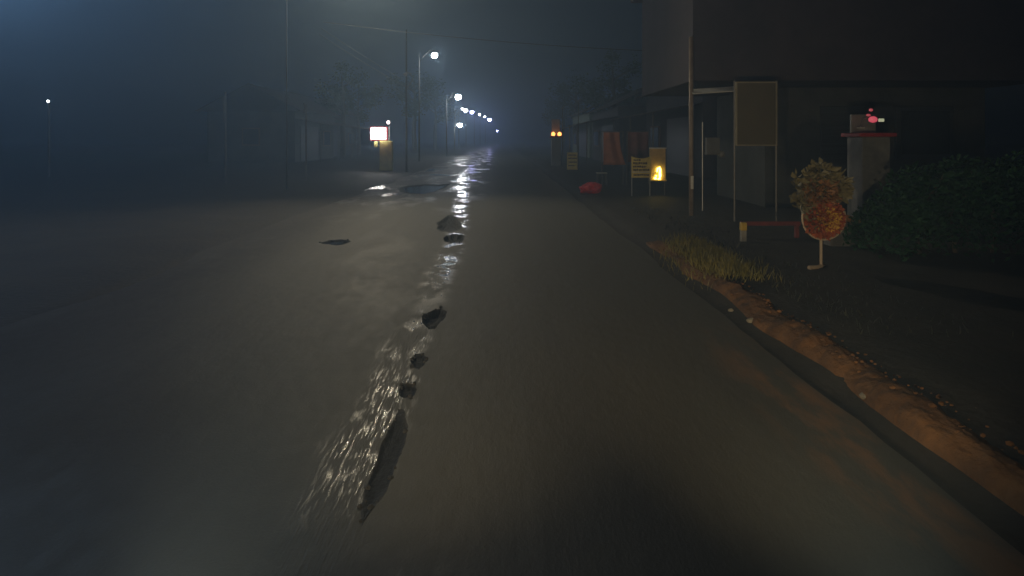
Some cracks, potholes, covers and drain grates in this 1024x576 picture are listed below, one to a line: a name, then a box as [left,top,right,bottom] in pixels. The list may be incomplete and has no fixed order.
pothole [410,353,428,370]
pothole [397,184,450,194]
pothole [357,409,408,527]
pothole [443,234,465,243]
pothole [422,306,447,329]
pothole [436,214,462,232]
pothole [399,381,417,398]
